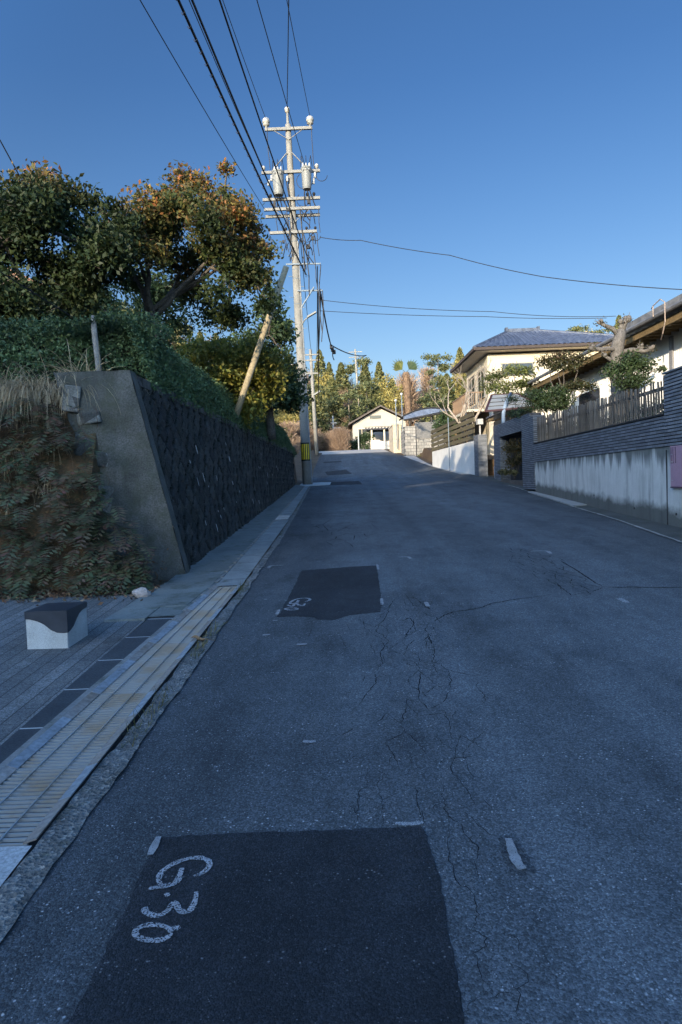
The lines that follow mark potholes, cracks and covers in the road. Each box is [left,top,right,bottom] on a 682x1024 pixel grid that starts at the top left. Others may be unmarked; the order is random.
crack [433,712,529,1019]
drain grate [6,689,157,770]
drain grate [92,640,197,695]
drain grate [149,607,223,644]
crack [310,596,538,828]
drain grate [187,584,242,611]
drain grate [0,763,97,847]
